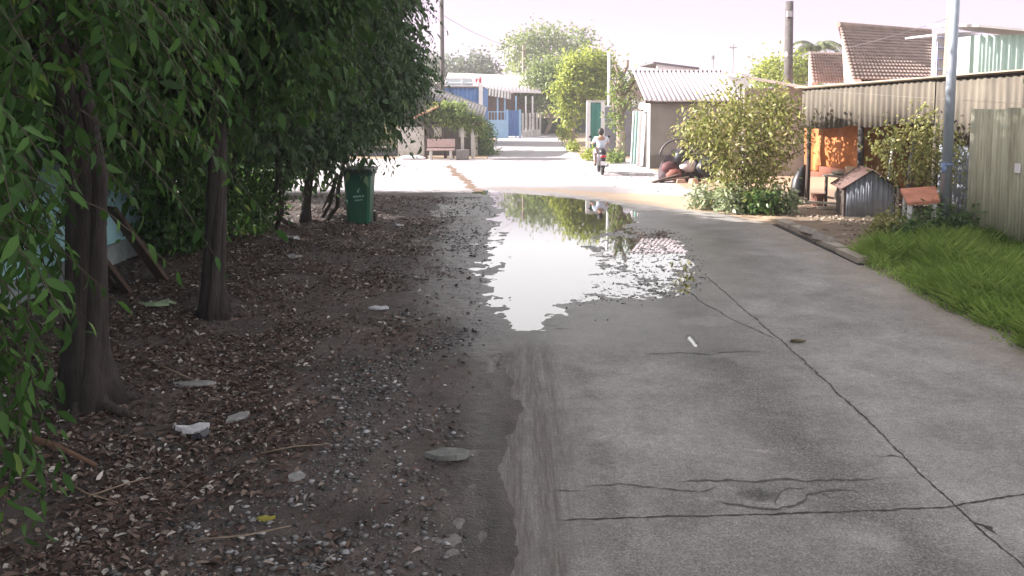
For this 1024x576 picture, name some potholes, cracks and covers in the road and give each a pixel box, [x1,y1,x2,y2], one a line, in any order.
crack [563,477,1024,520]
crack [653,291,773,355]
